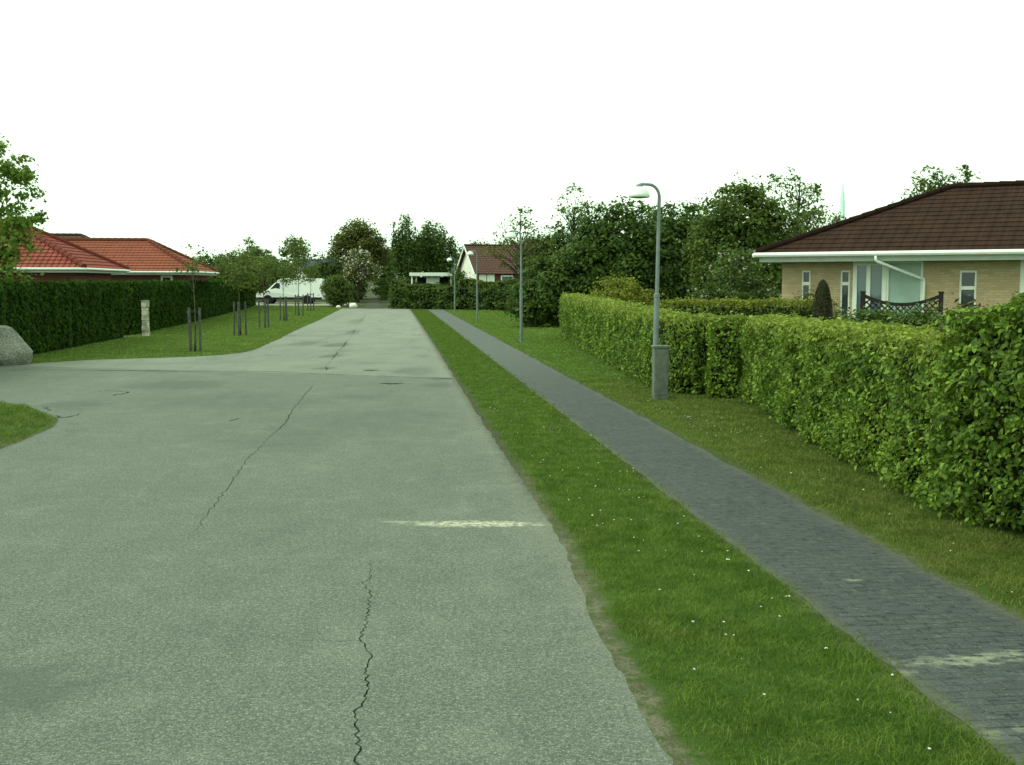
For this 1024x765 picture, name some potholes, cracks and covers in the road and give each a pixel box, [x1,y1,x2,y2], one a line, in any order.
crack [322,560,373,765]
crack [197,385,314,529]
